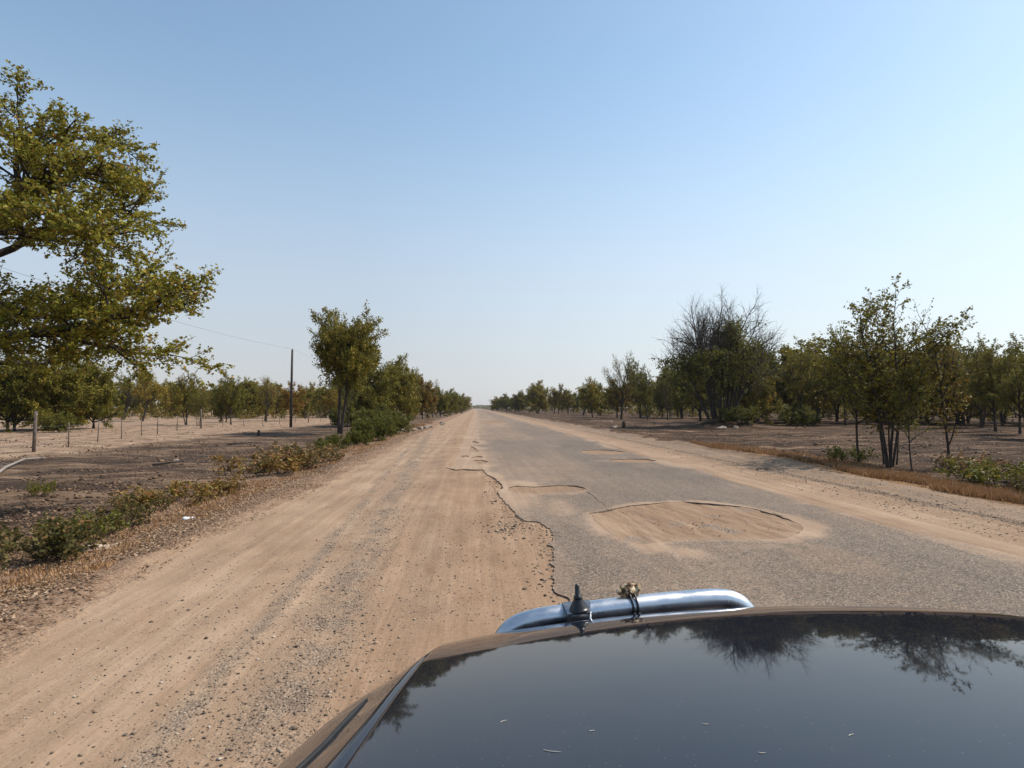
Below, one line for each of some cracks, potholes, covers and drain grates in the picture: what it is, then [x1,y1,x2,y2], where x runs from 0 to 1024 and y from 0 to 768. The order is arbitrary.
pothole [509,485,588,494]
pothole [589,501,803,544]
